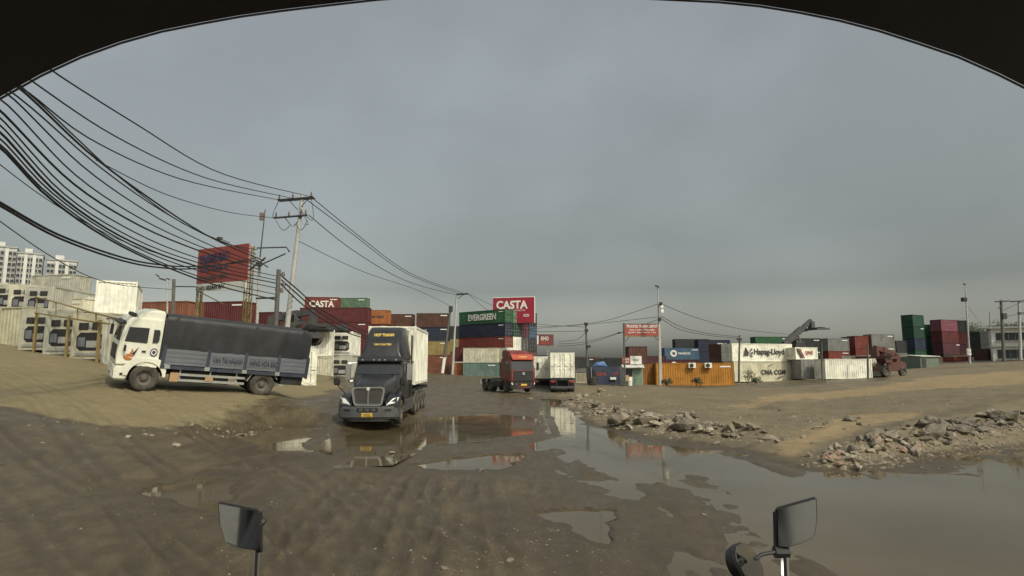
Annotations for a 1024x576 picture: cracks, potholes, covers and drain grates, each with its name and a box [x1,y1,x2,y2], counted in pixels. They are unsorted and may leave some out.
pothole [520,506,628,549]
pothole [405,453,531,472]
pothole [128,477,245,515]
